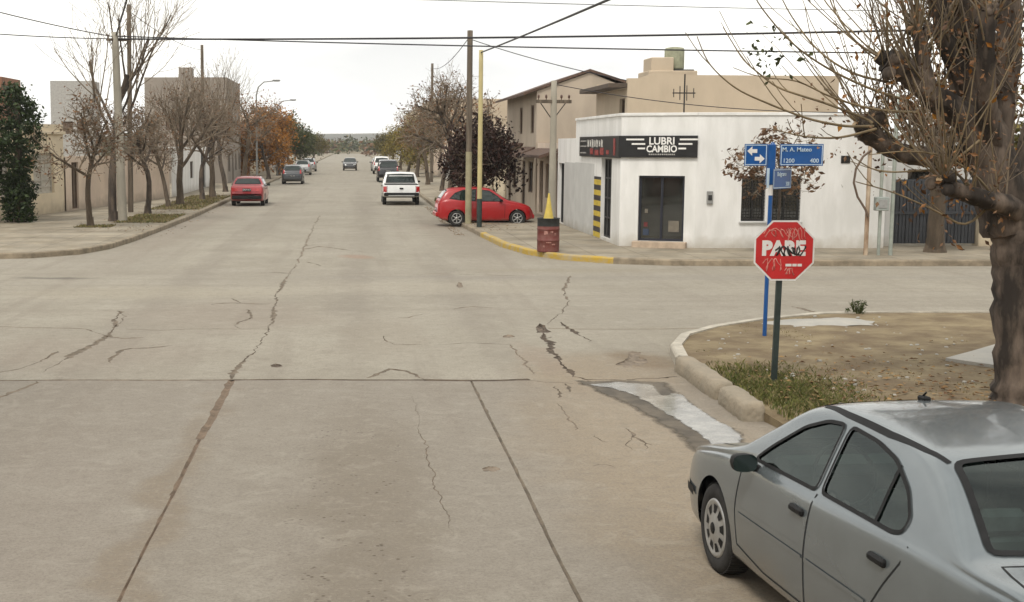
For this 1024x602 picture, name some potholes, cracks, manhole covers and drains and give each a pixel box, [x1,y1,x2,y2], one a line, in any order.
crack [0,311,165,398]
crack [625,428,651,449]
crack [413,400,454,533]
crack [211,216,361,379]
crack [509,276,677,430]
crack [367,368,423,379]
